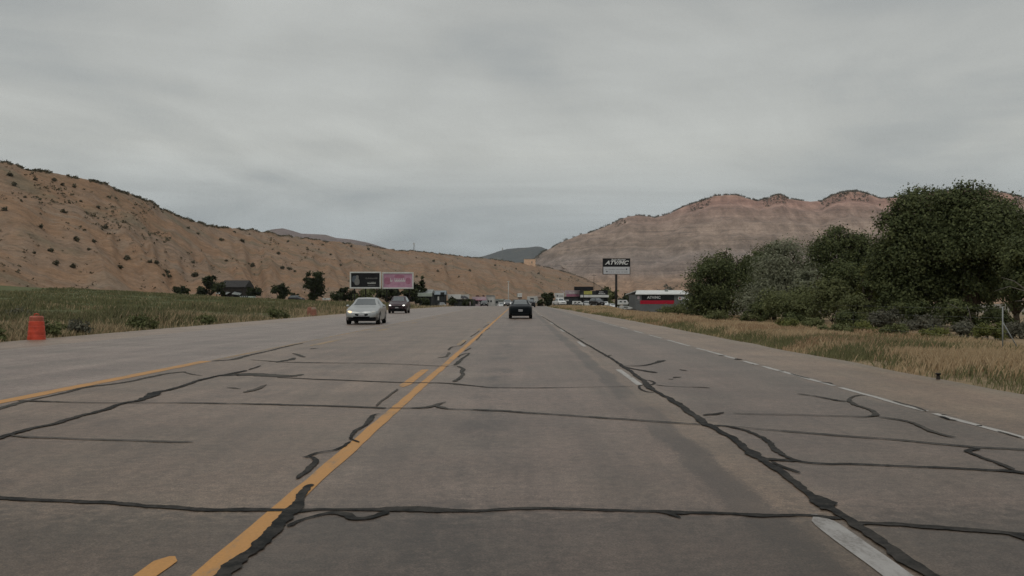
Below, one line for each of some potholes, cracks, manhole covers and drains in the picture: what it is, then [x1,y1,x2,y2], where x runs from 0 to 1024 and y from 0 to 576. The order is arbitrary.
crack [0,343,1024,474]
